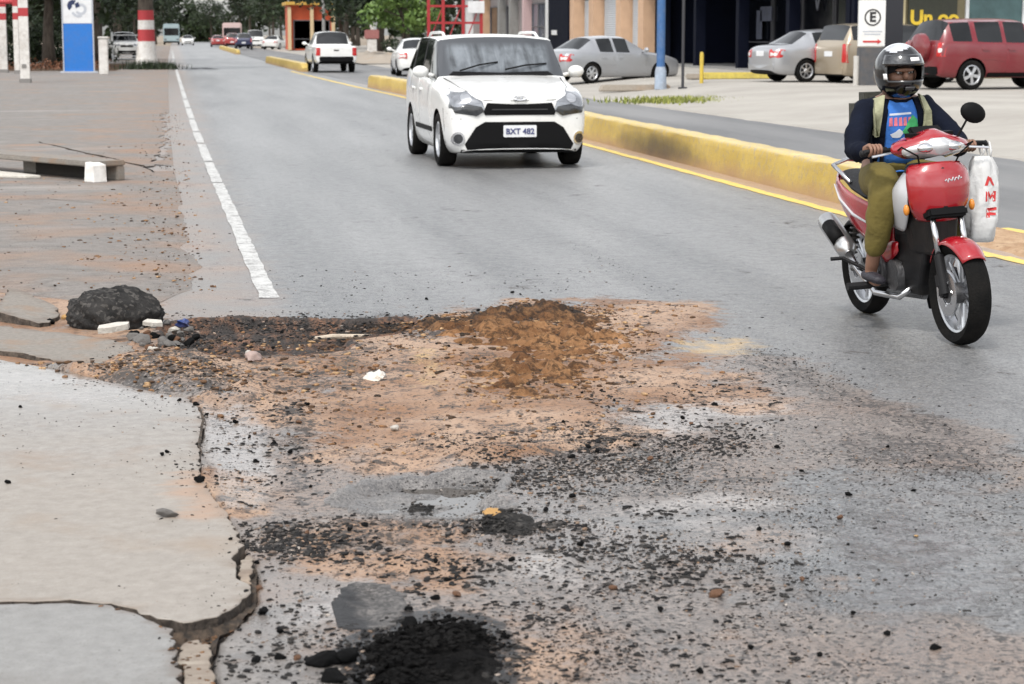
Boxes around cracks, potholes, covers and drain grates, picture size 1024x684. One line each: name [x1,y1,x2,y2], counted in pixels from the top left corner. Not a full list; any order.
pothole [156,315,421,358]
crack [39,117,168,173]
crack [98,565,258,684]
